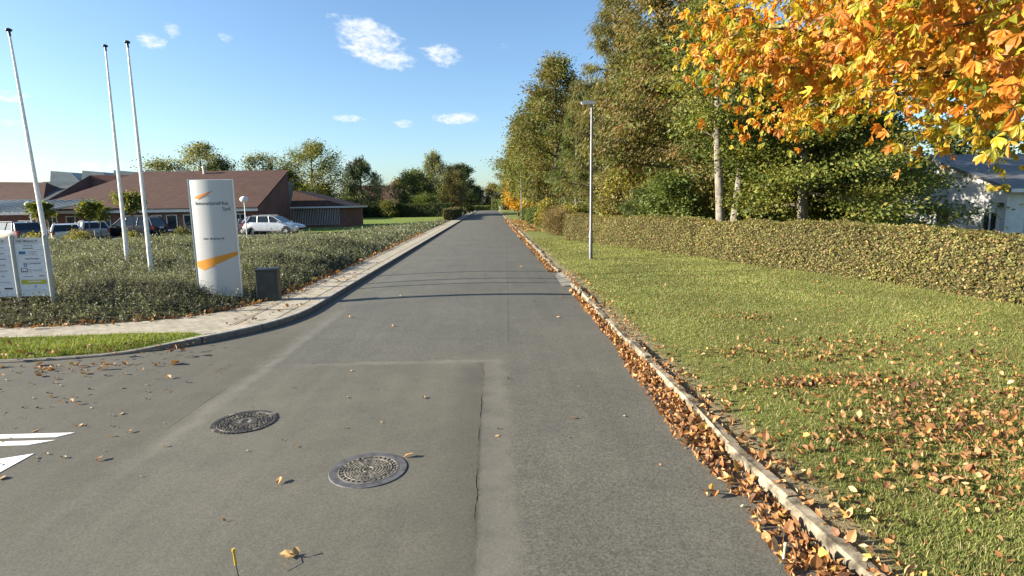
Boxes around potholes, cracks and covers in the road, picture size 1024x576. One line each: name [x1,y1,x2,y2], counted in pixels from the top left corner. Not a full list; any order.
manhole cover [210,410,278,434]
manhole cover [328,452,407,489]
crack [471,362,485,570]
